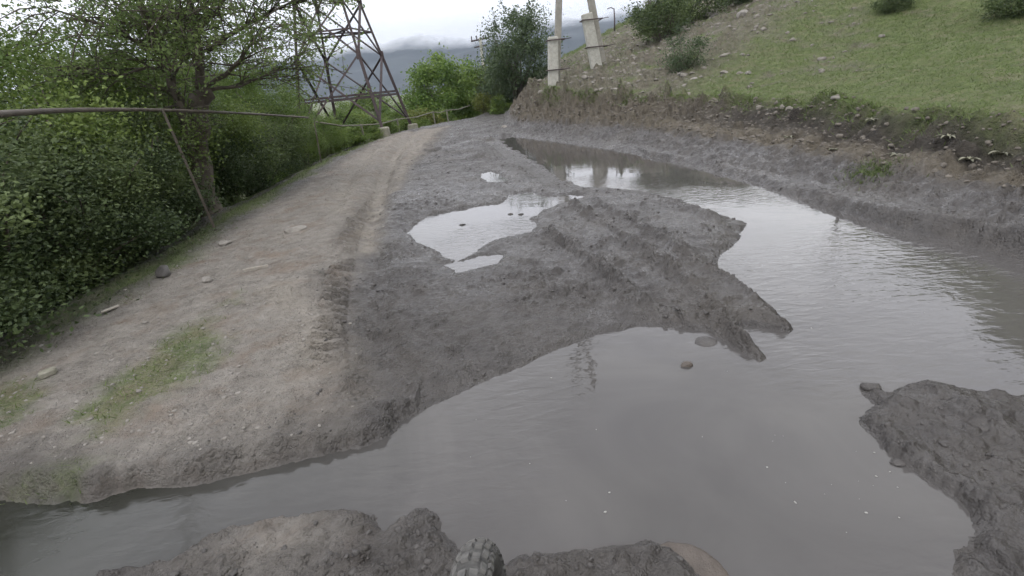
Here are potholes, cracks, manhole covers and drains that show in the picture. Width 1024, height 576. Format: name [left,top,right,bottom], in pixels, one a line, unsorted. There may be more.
pothole [0,133,1024,576]
